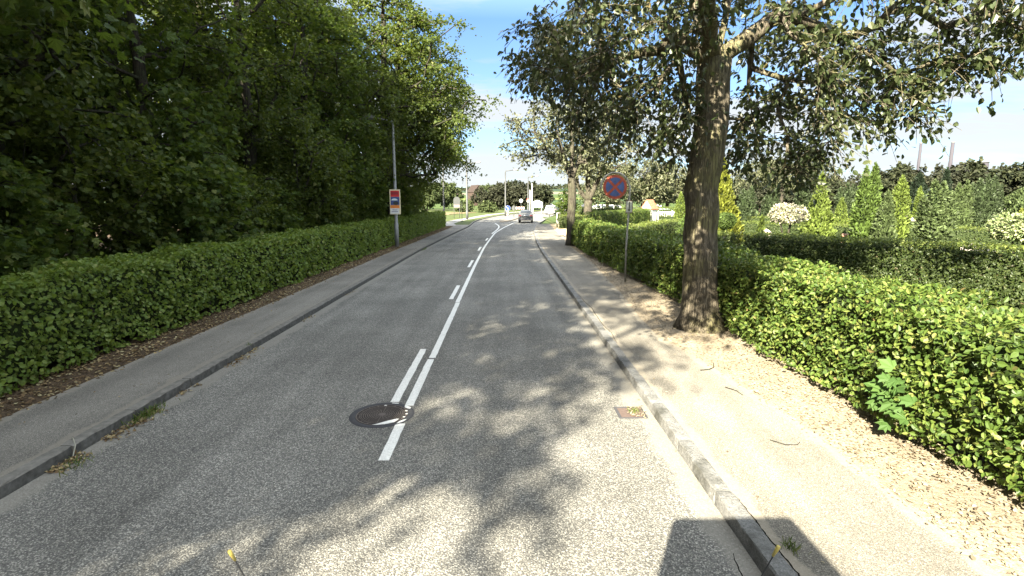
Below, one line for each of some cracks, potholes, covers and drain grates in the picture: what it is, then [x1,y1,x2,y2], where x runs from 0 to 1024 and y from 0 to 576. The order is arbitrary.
manhole cover [349,403,414,428]
